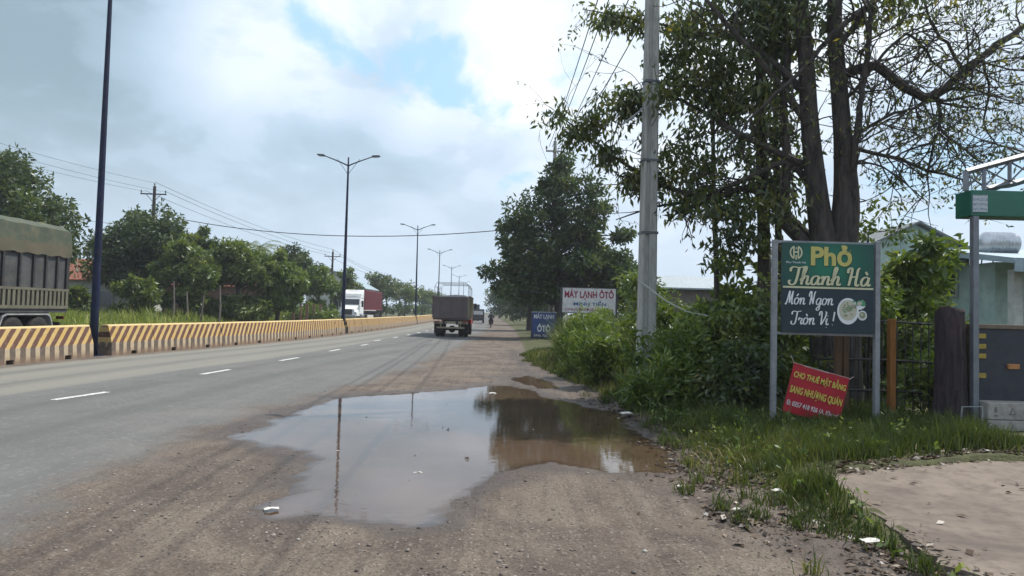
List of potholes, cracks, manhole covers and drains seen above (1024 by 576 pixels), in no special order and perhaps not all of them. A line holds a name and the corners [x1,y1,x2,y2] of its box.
pothole [504,373,568,390]
pothole [200,383,695,534]
